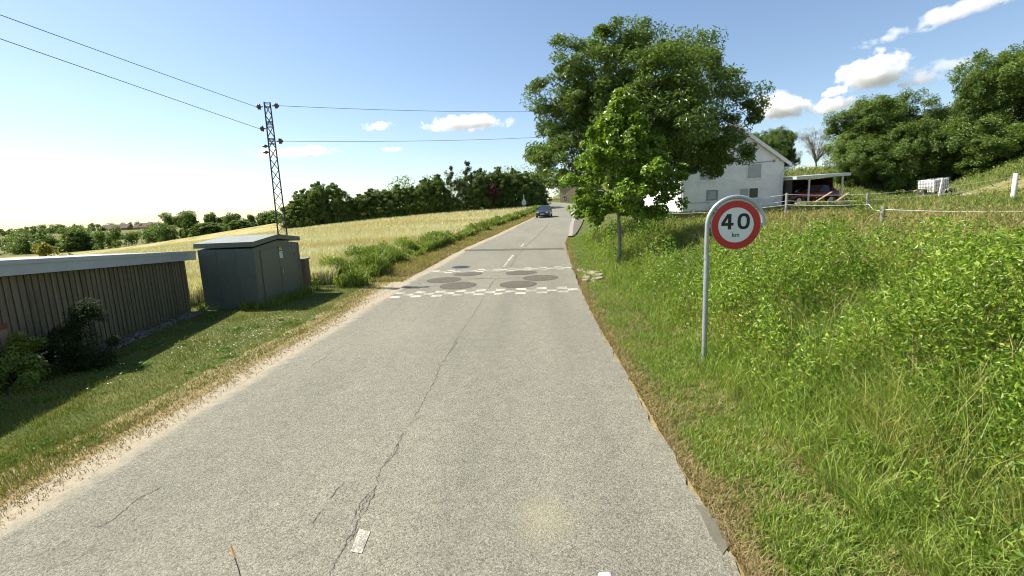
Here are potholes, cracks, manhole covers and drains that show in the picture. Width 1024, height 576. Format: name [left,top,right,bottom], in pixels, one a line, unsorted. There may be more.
crack [313,281,494,576]
crack [44,488,159,565]
